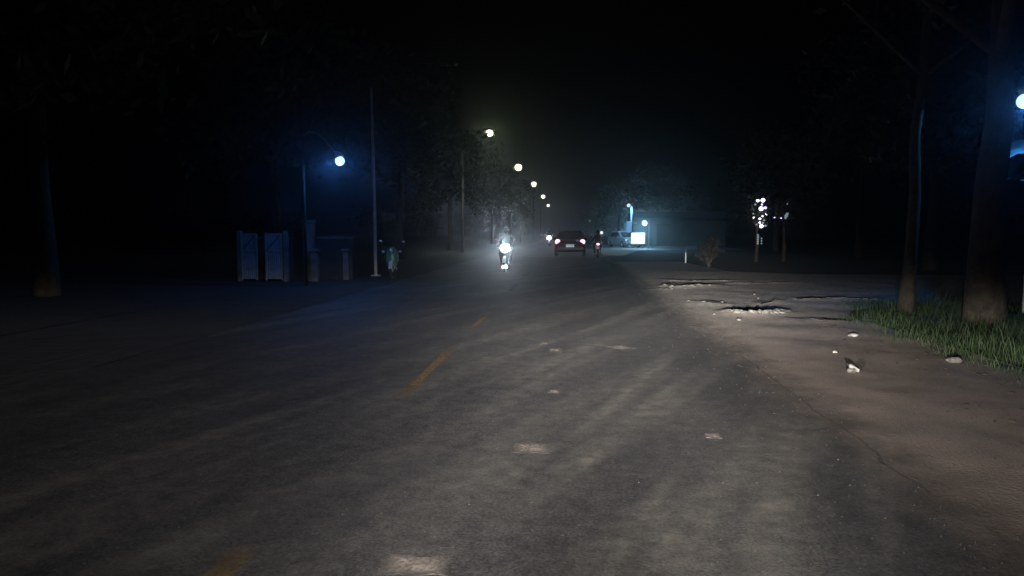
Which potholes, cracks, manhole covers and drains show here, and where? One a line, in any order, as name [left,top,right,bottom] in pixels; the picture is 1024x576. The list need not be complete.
crack [743,357,931,494]
crack [660,287,724,304]
